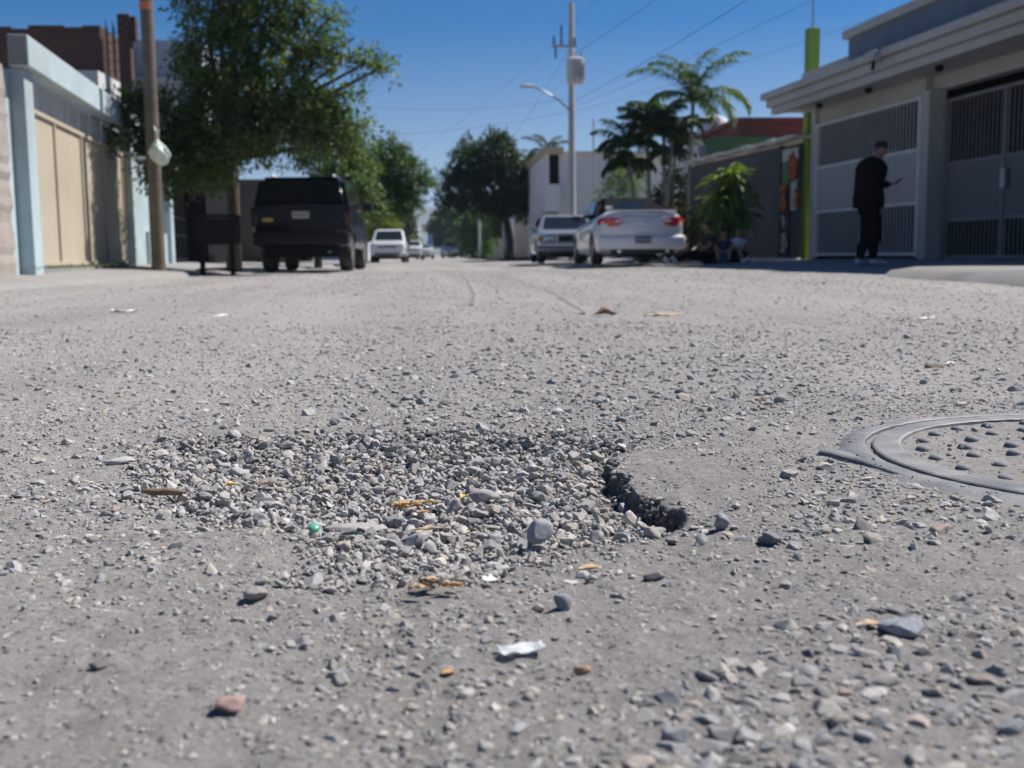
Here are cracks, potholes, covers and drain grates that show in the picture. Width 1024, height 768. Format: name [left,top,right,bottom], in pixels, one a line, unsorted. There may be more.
pothole [99,423,693,601]
manhole cover [816,412,1024,507]
